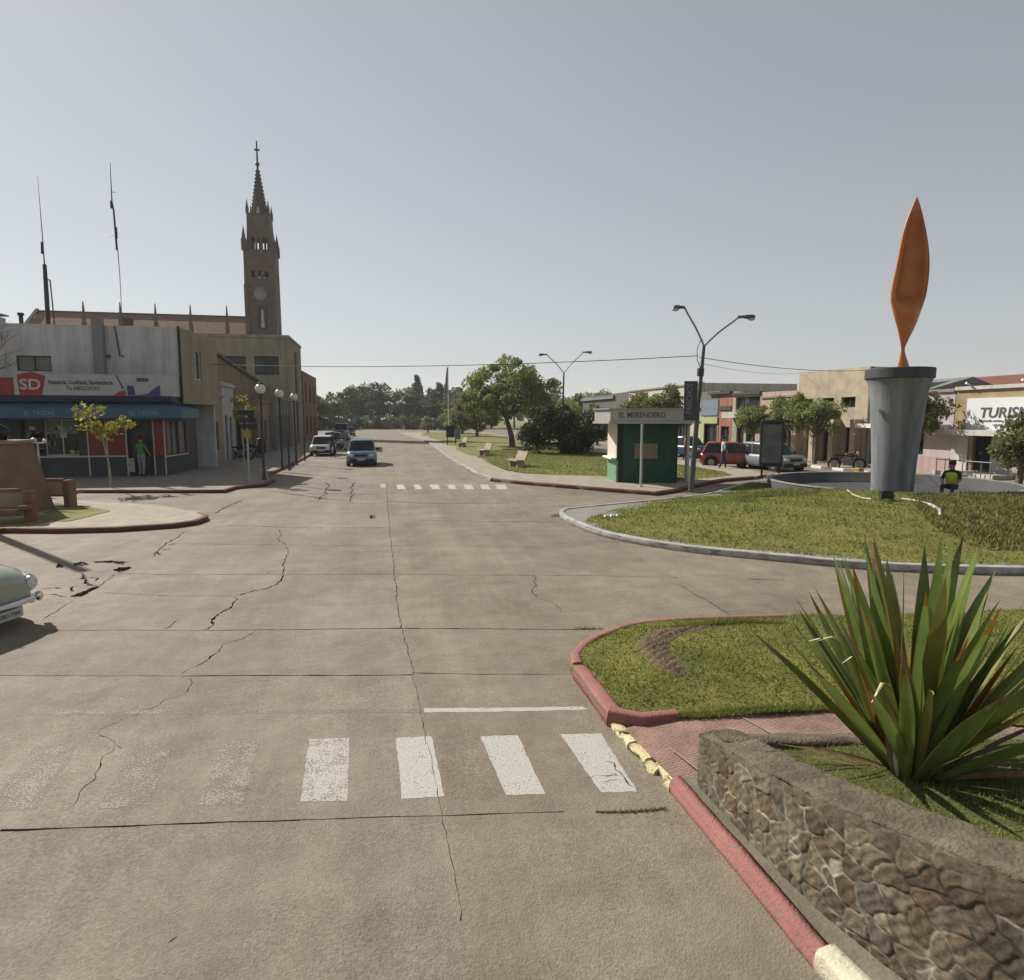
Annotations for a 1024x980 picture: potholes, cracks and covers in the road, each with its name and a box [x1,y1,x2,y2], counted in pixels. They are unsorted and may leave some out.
crack [66,529,289,810]
